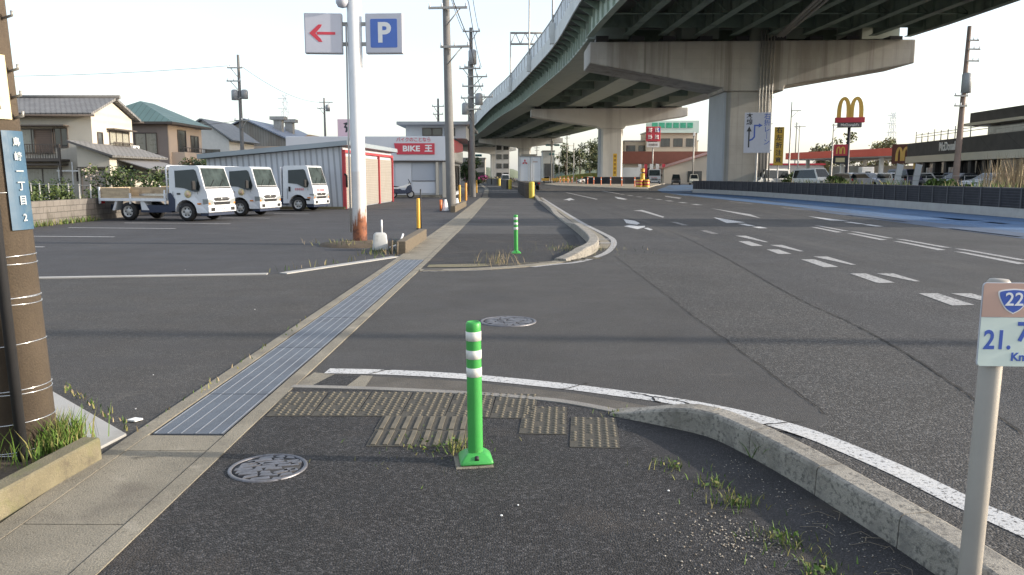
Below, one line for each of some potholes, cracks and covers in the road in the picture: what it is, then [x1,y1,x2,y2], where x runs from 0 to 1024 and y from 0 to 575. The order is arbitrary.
crack [630,392,690,404]
manhole cover [480,316,536,327]
manhole cover [227,454,308,483]
drain grate [153,259,424,436]
